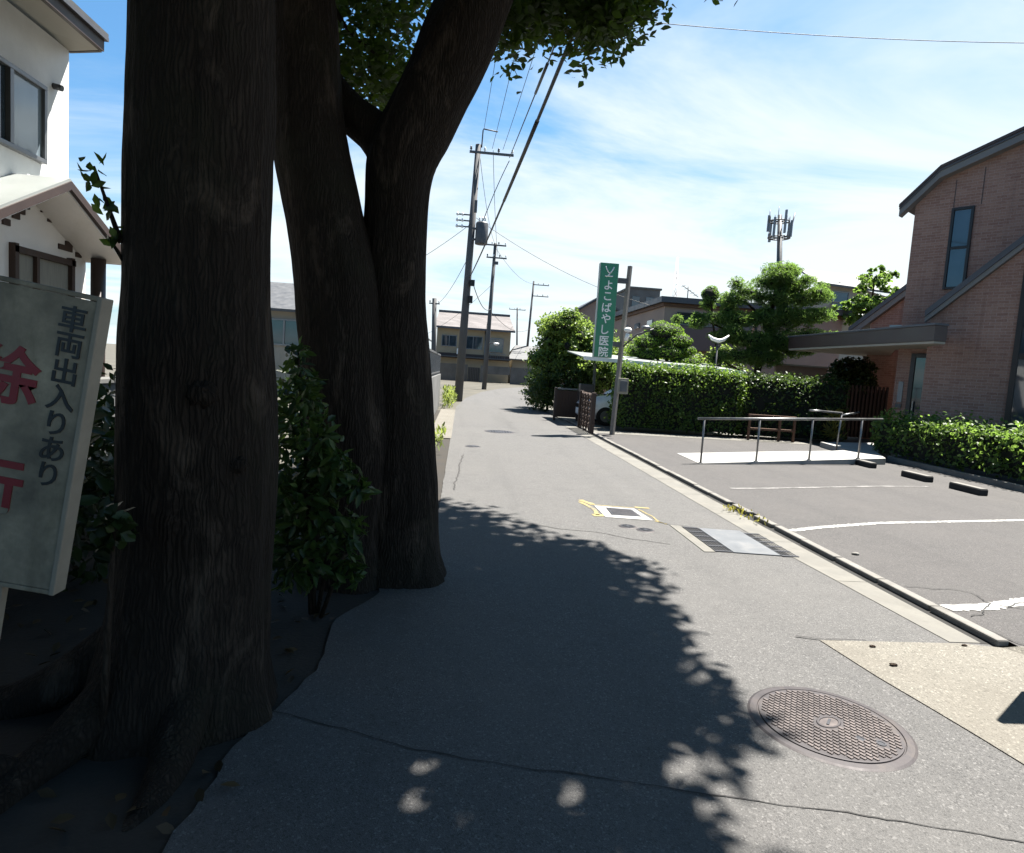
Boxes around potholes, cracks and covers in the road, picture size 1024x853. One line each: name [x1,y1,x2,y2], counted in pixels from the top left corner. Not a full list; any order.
manhole cover [747,686,918,772]
utility cover [594,505,652,520]
crack [274,711,1024,843]
crack [904,585,1024,644]
